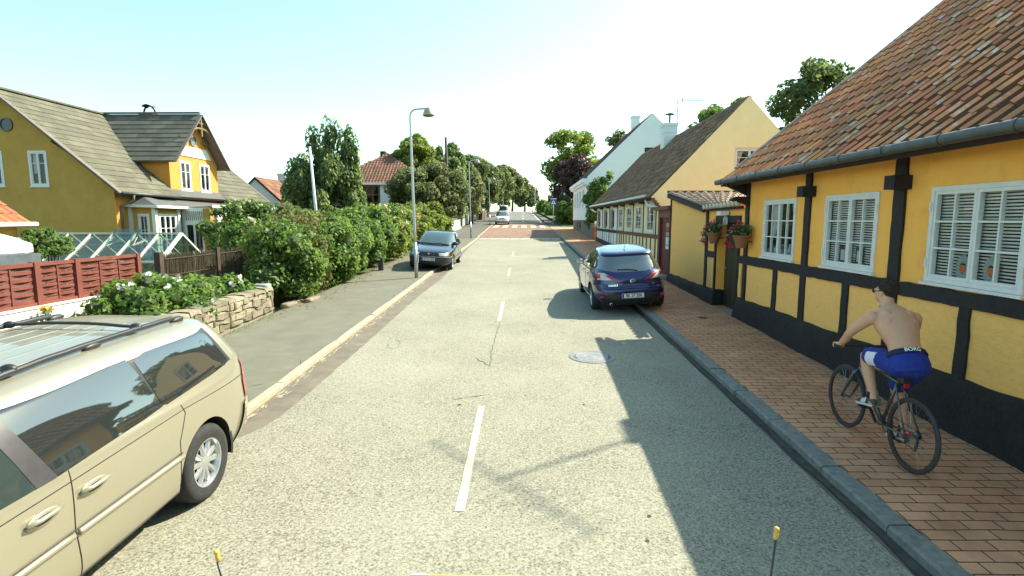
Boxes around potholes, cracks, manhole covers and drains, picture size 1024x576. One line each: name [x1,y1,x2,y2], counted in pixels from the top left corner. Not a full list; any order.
manhole cover [569,350,615,363]
